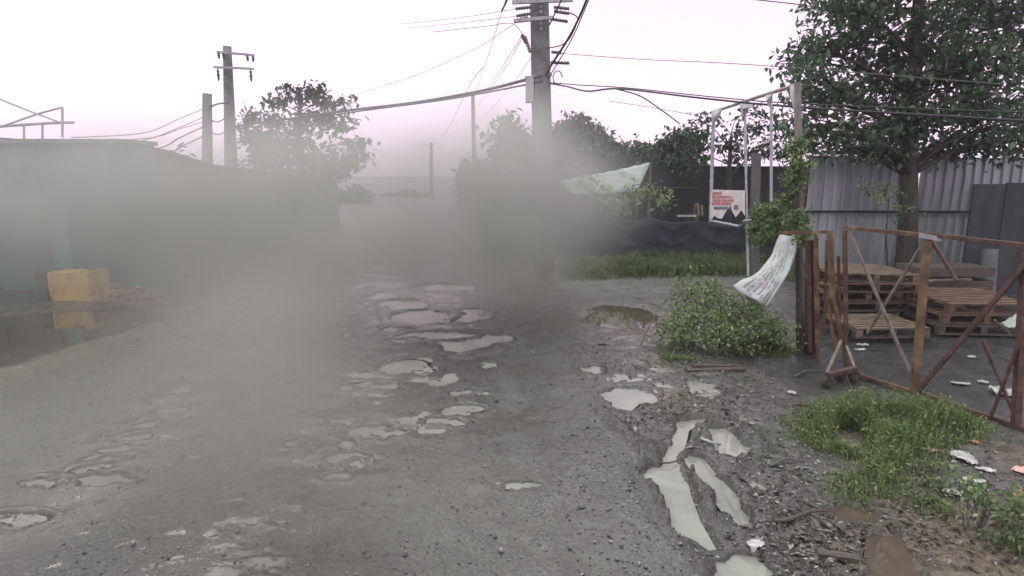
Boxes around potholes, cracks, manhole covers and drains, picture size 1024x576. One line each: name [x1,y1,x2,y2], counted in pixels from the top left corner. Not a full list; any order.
pothole [337,441,358,450]
pothole [20,478,62,489]
pothole [378,360,433,375]
pothole [495,480,541,491]
pothole [89,454,133,465]
pothole [71,462,121,474]
pothole [342,425,407,442]
pothole [429,332,513,354]
pothole [0,512,50,531]
pothole [321,472,353,481]
pothole [441,405,487,416]
pothole [116,432,153,442]
